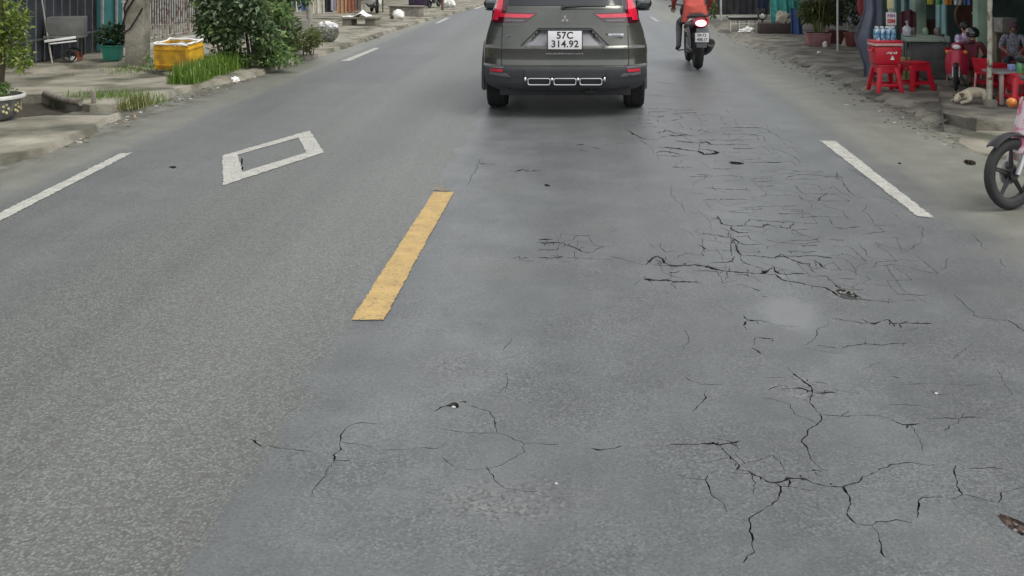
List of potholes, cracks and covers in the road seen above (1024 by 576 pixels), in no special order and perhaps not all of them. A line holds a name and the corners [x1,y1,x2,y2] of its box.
crack [578,82,948,303]
pothole [835,289,858,299]
crack [802,318,931,354]
crack [743,315,792,354]
crack [515,230,640,264]
crack [670,345,1012,563]
crack [311,422,375,495]
crack [394,401,557,492]
